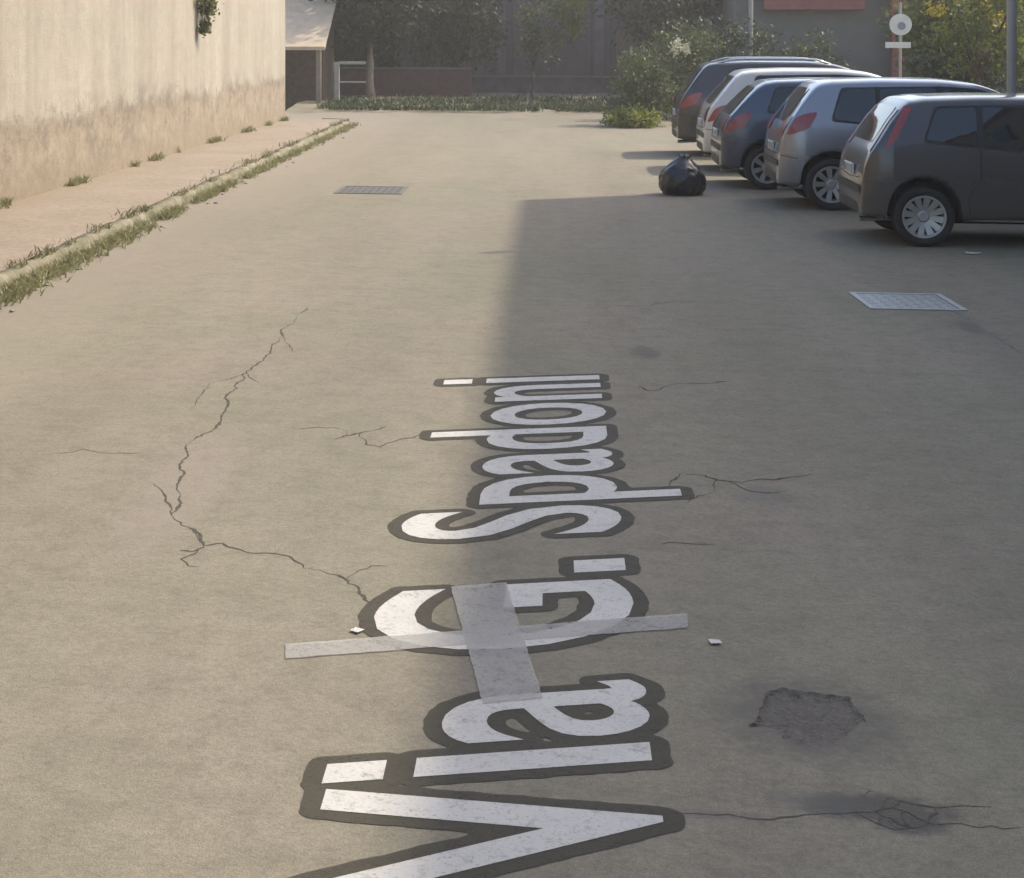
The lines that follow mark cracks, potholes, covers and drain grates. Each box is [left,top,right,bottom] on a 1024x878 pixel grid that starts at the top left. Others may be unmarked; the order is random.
crack [157,307,383,602]
crack [301,426,421,448]
manhole cover [848,292,968,311]
crack [669,473,811,503]
crack [683,787,1022,830]
crack [639,380,731,391]
pothole [748,687,866,749]
